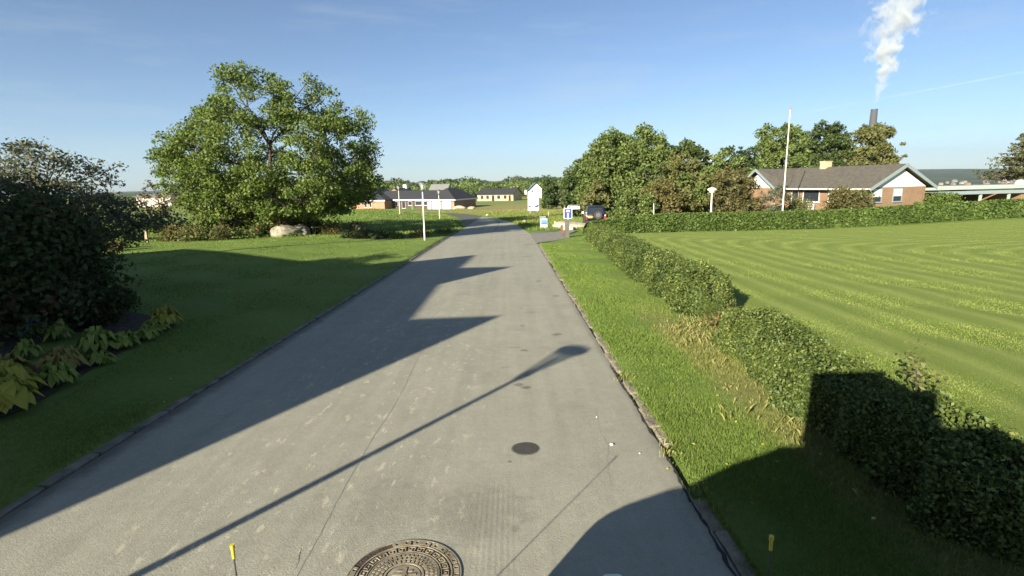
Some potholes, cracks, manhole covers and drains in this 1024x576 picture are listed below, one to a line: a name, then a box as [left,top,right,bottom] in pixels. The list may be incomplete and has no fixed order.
manhole cover [346,539,462,576]
